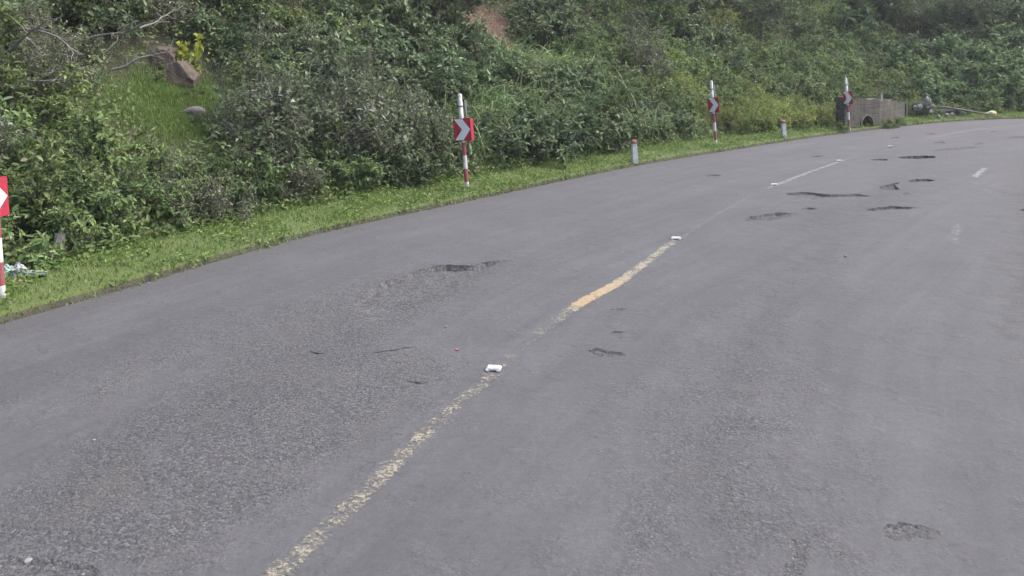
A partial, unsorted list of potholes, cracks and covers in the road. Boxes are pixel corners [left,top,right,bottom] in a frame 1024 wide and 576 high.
pothole [351,260,513,327]
pothole [743,213,798,222]
pothole [587,348,626,358]
